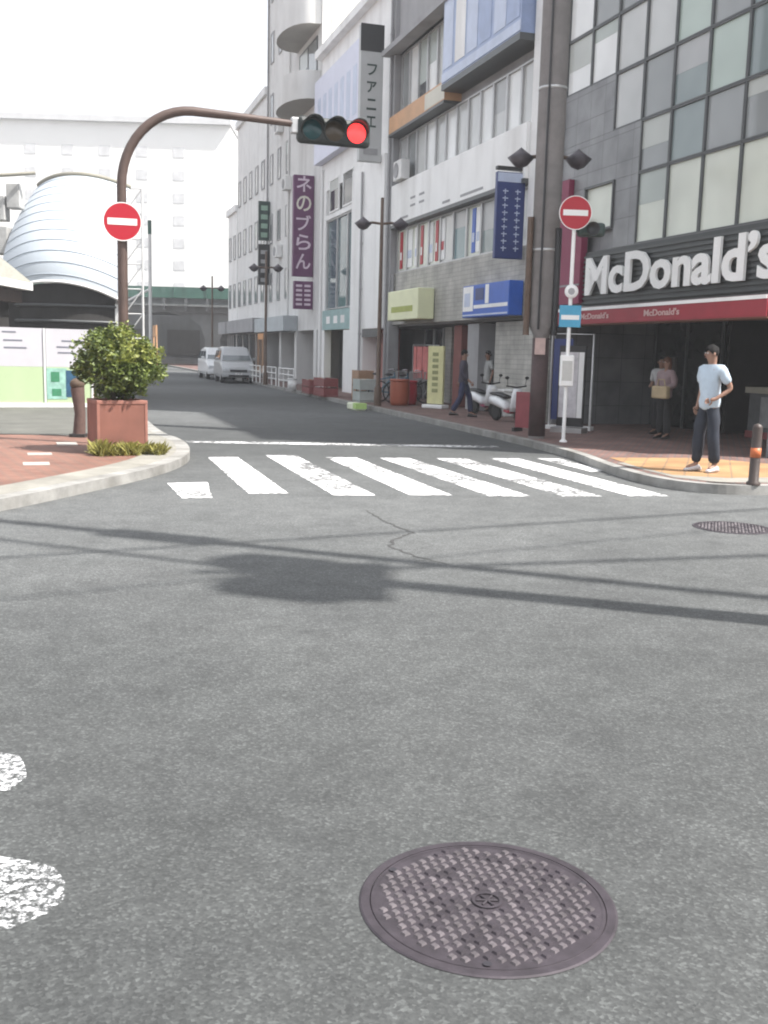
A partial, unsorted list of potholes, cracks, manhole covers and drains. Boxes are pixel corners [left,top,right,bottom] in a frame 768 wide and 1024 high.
manhole cover [692,521,768,534]
manhole cover [359,842,618,979]
crack [367,510,446,564]
